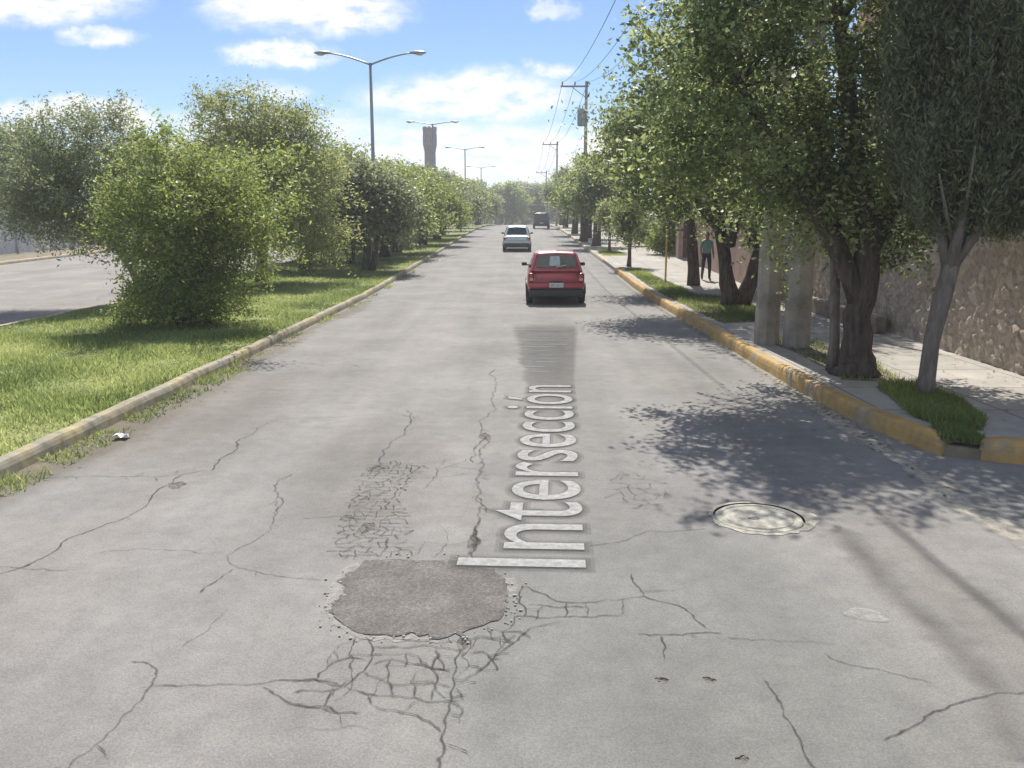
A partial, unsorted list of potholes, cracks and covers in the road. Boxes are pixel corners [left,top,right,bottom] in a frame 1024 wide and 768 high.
crack [99,575,704,765]
crack [886,692,1010,739]
crack [335,460,477,557]
crack [11,471,178,571]
manhole cover [709,501,819,535]
